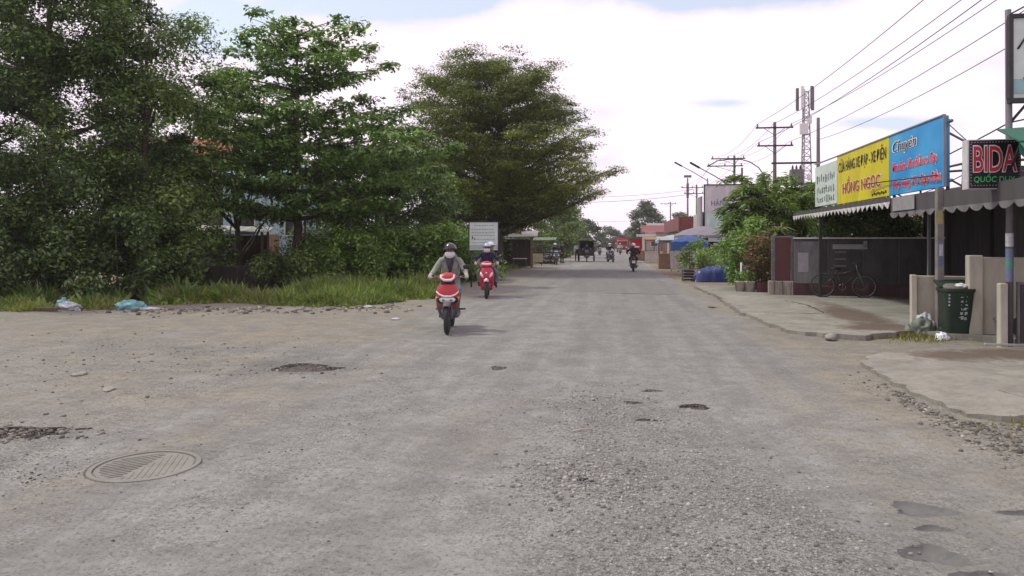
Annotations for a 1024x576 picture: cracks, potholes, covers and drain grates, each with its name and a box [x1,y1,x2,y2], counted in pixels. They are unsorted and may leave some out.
manhole cover [83,449,204,483]
pothole [891,501,965,518]
pothole [897,543,973,568]
pothole [913,524,955,532]
pothole [0,426,72,439]
pothole [271,363,346,372]
